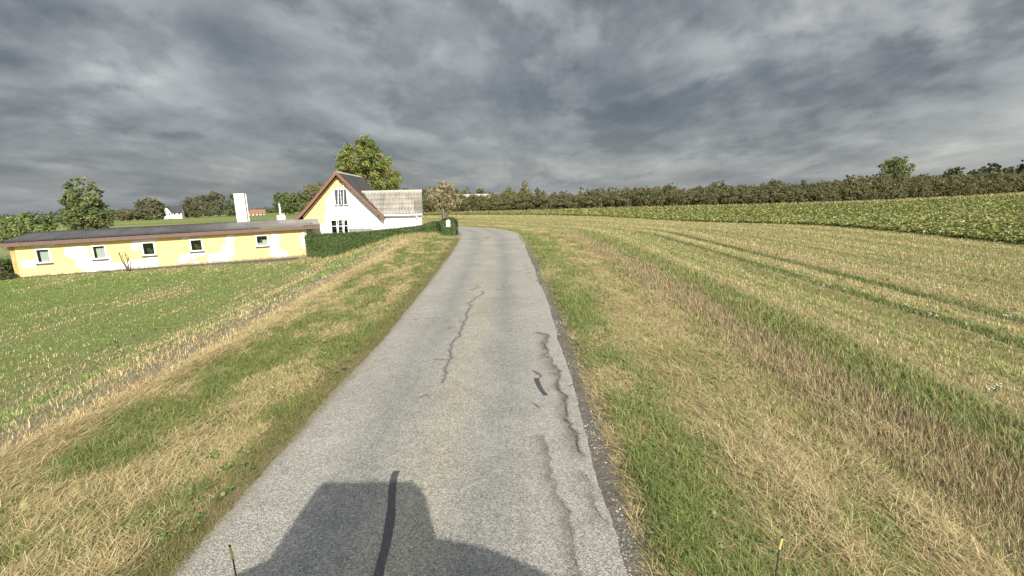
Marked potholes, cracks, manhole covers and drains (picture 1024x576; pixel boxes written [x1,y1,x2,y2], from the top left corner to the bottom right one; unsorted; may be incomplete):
crack [533,332,609,576]
crack [406,285,499,397]
